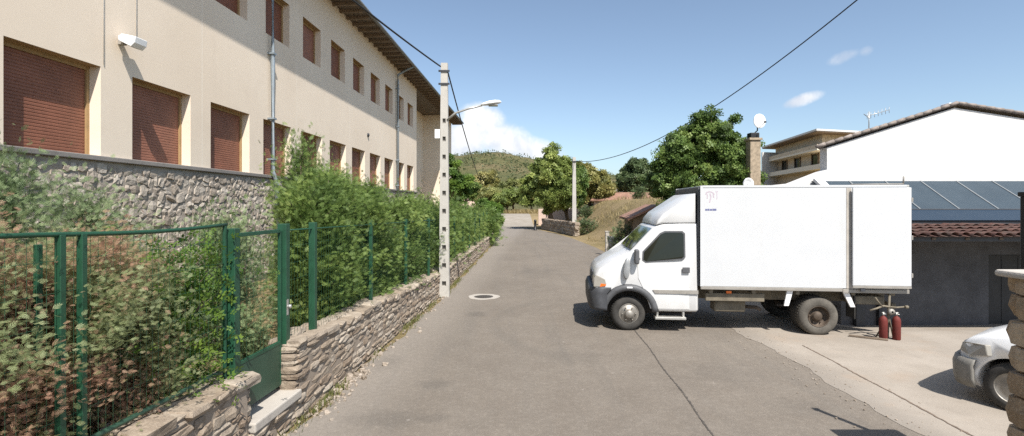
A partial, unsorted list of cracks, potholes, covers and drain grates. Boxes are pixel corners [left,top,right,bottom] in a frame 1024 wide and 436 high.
crack [634,329,714,436]
